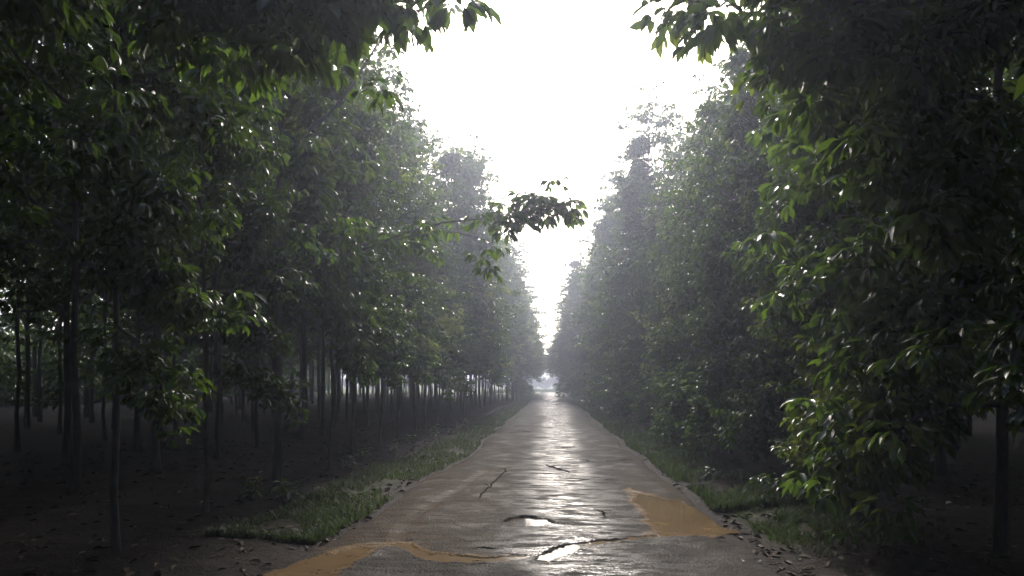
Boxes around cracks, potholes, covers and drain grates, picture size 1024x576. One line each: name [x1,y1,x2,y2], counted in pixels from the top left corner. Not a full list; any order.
crack [479,468,507,498]
pothole [499,515,559,527]
crack [547,446,633,481]
pothole [530,533,663,563]
